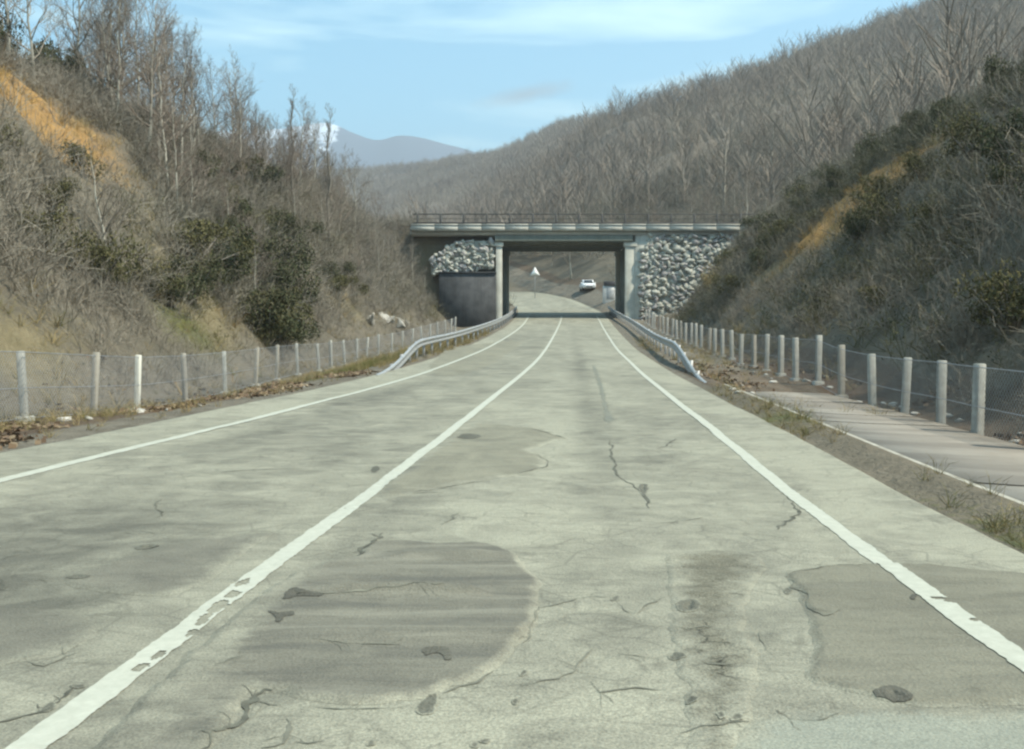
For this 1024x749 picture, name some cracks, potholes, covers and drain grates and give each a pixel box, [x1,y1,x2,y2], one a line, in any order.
crack [777,497,801,529]
pothole [415,692,439,715]
crack [198,684,336,749]
crack [354,533,406,555]
crack [703,659,753,683]
crack [607,442,702,523]
crack [680,708,753,733]
crack [443,596,666,707]
pothole [269,610,295,622]
pothole [422,646,452,660]
pothole [873,685,913,702]
